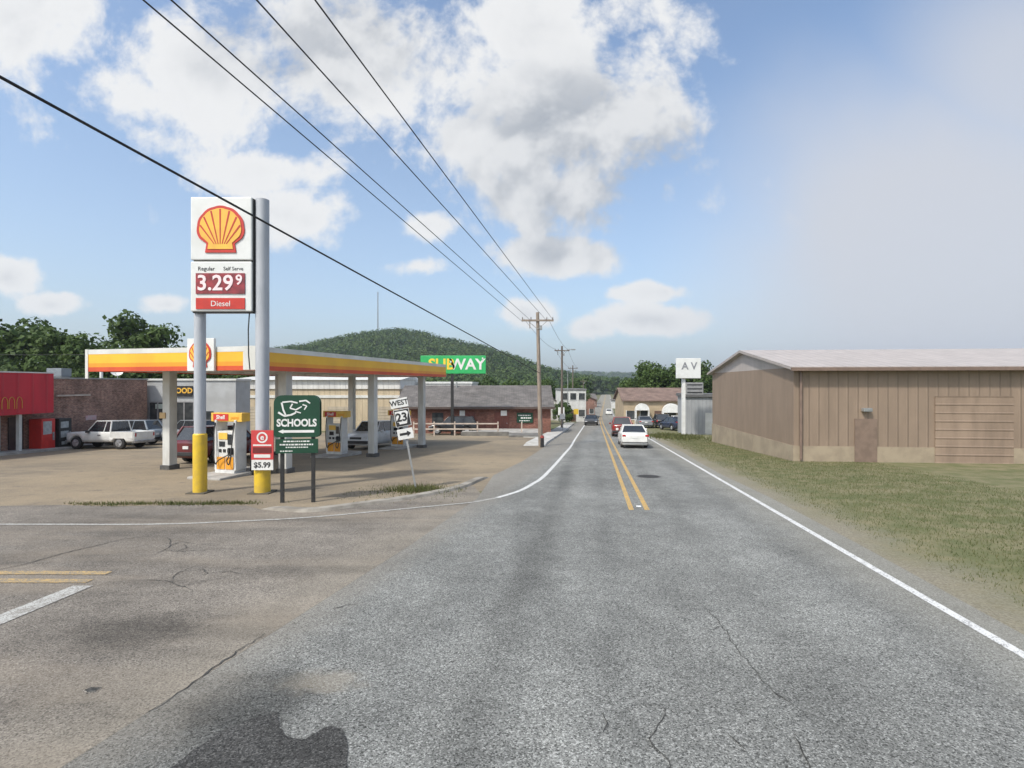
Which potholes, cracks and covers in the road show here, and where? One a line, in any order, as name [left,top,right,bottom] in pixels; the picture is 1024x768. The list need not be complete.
crack [702,610,791,703]
crack [794,736,811,768]
crack [640,704,671,768]
crack [128,569,241,590]
